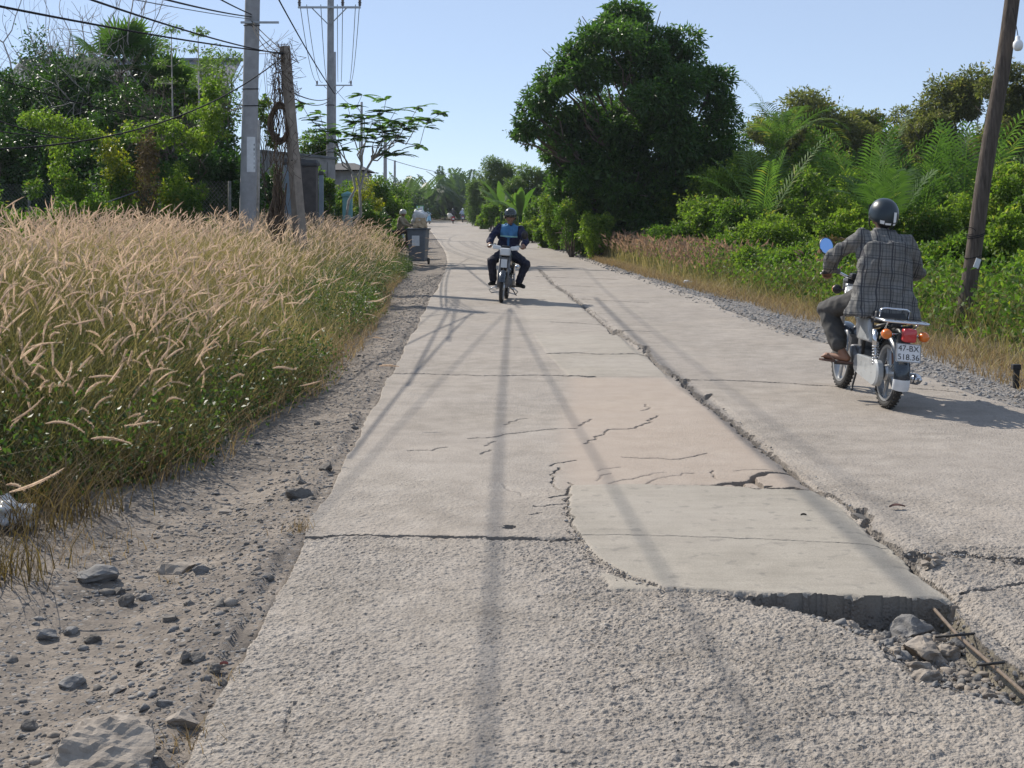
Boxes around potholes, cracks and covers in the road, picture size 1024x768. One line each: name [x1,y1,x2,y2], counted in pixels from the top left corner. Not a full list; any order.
pothole [720,593,1024,709]
crack [467,270,1024,601]
